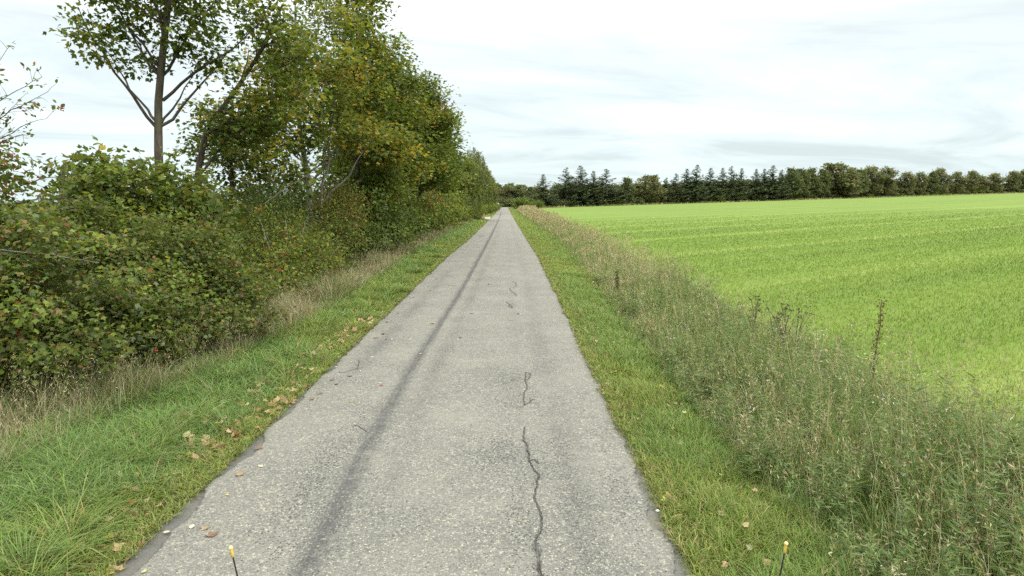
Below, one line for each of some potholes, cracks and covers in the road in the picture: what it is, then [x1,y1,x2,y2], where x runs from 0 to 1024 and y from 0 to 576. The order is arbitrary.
crack [522,427,543,576]
